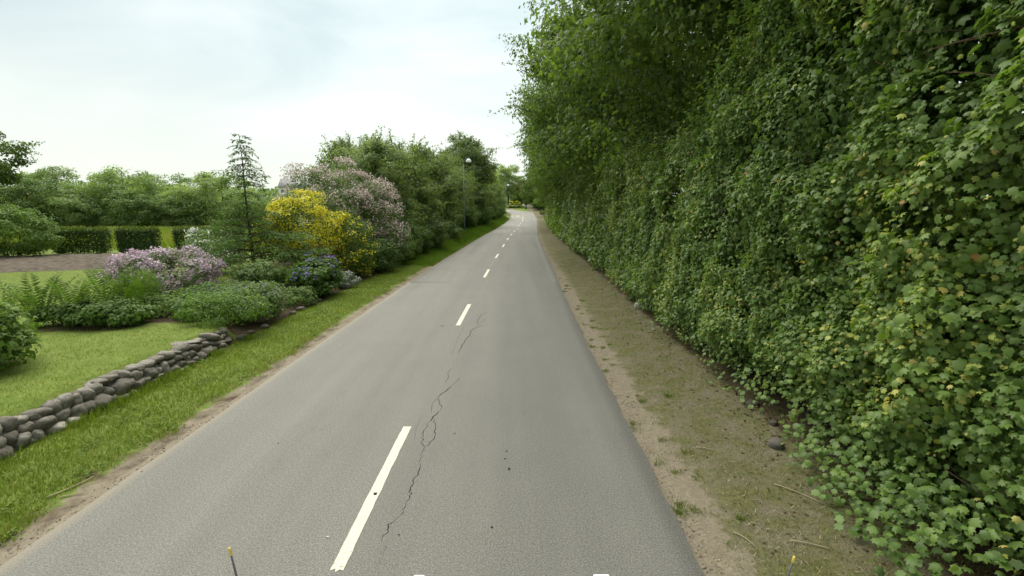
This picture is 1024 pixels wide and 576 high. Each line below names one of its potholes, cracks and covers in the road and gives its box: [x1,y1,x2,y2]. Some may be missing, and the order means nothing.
crack [378,318,486,559]
